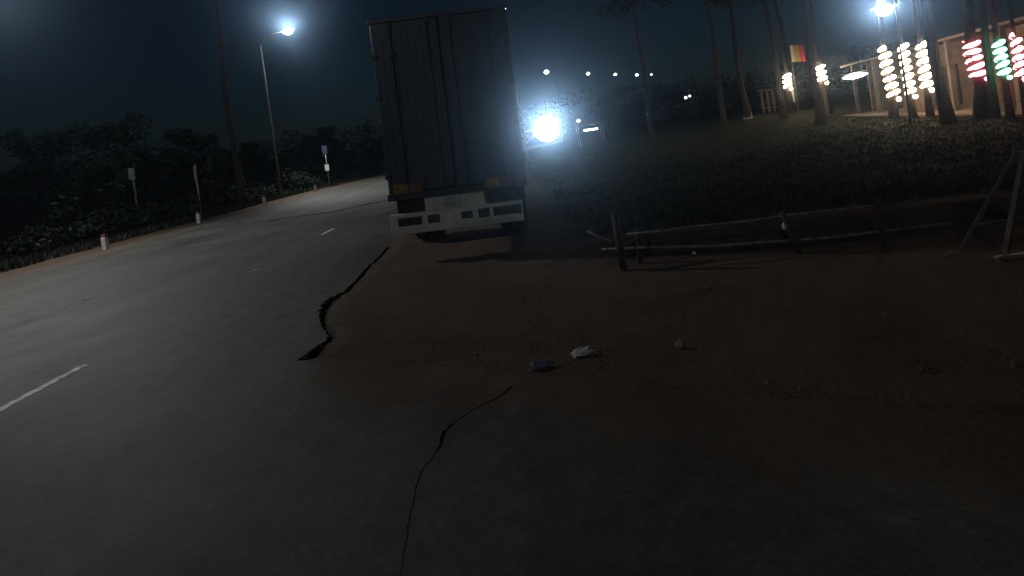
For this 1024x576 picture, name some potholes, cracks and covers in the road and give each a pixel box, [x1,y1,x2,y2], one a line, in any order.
crack [240,200,388,224]
crack [400,387,513,576]
crack [298,248,388,361]
